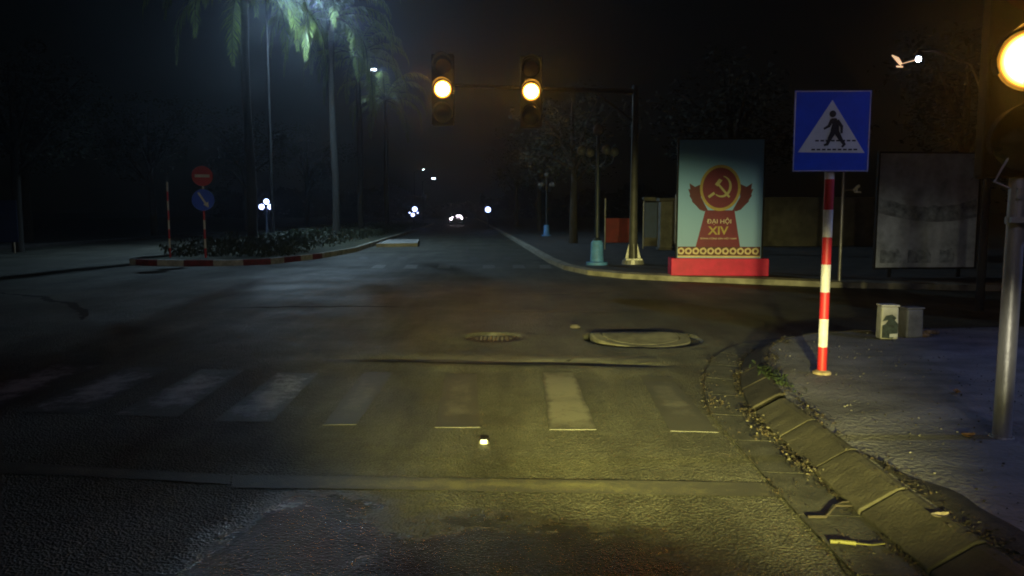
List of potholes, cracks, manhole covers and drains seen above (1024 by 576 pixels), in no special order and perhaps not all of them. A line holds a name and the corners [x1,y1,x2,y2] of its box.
manhole cover [590,332,700,349]
crack [1,292,89,320]
